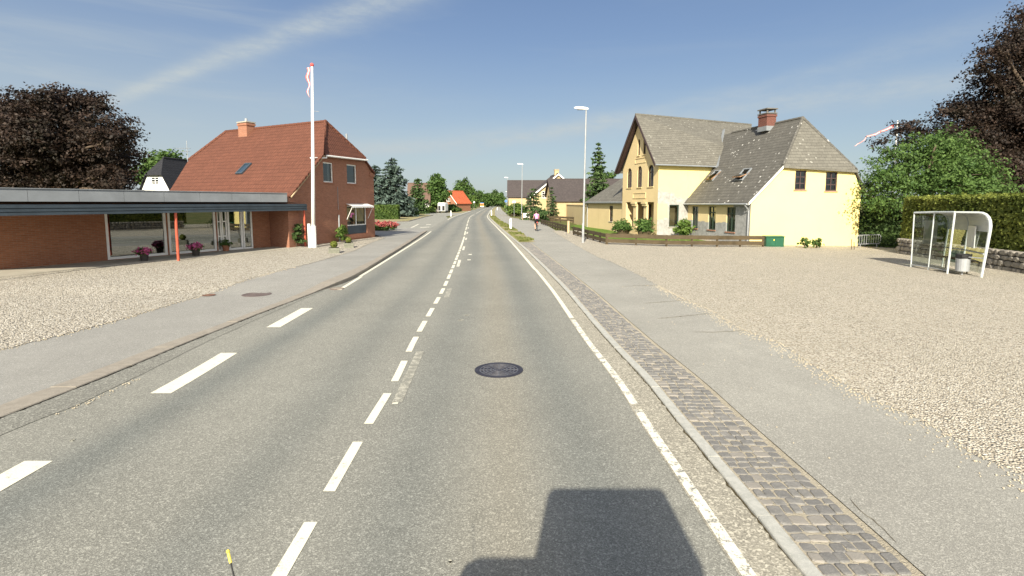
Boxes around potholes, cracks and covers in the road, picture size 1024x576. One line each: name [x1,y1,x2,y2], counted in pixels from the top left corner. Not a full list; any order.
manhole cover [475,362,523,378]
